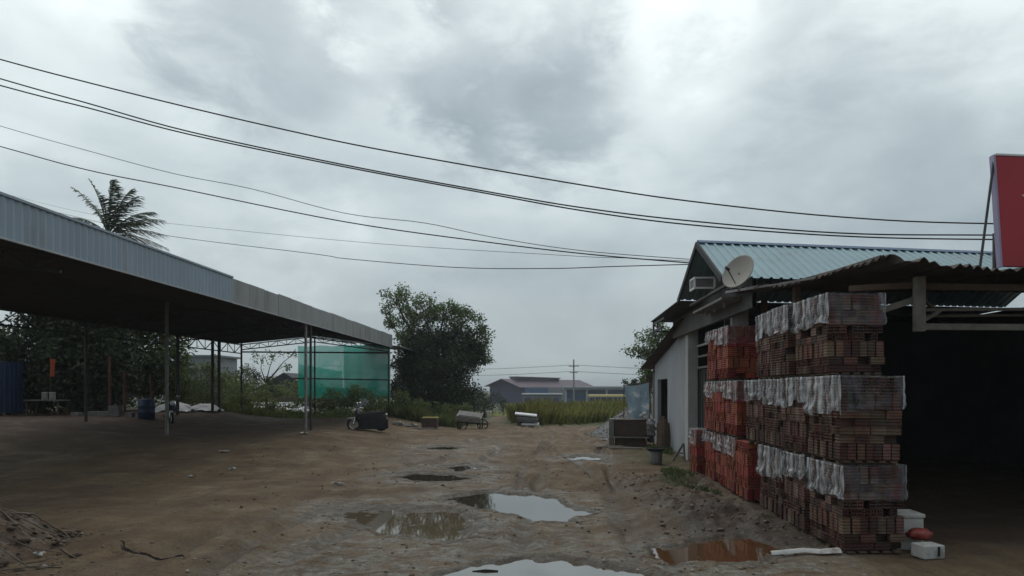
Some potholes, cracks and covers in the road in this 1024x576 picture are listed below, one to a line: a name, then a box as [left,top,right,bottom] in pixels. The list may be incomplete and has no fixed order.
pothole [384,470,487,483]
pothole [635,531,793,567]
pothole [321,502,505,547]
pothole [433,462,494,473]
pothole [422,551,675,576]
pothole [432,488,600,525]
